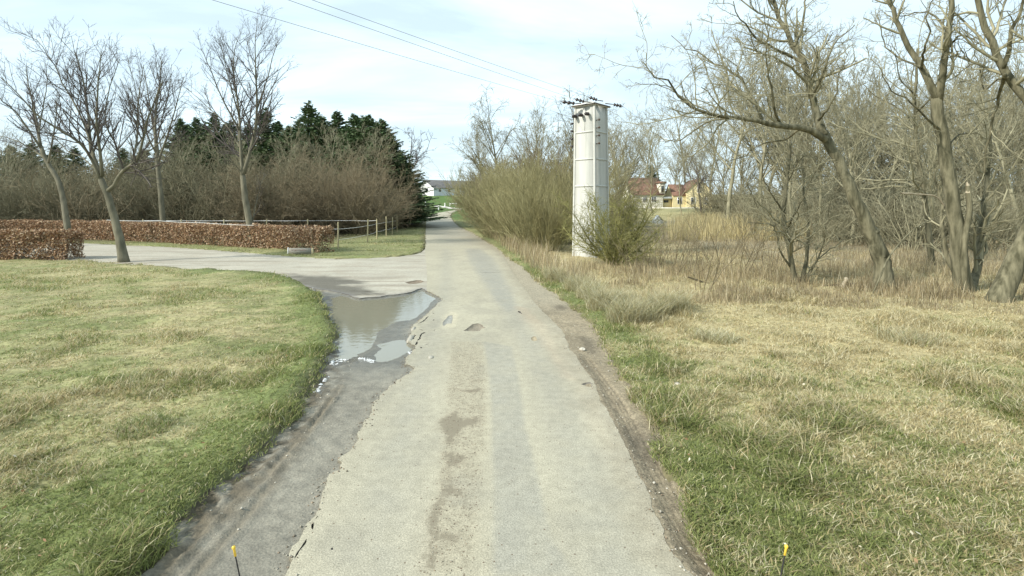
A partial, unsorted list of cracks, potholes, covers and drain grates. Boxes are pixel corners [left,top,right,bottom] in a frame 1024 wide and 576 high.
pothole [464,323,486,331]
